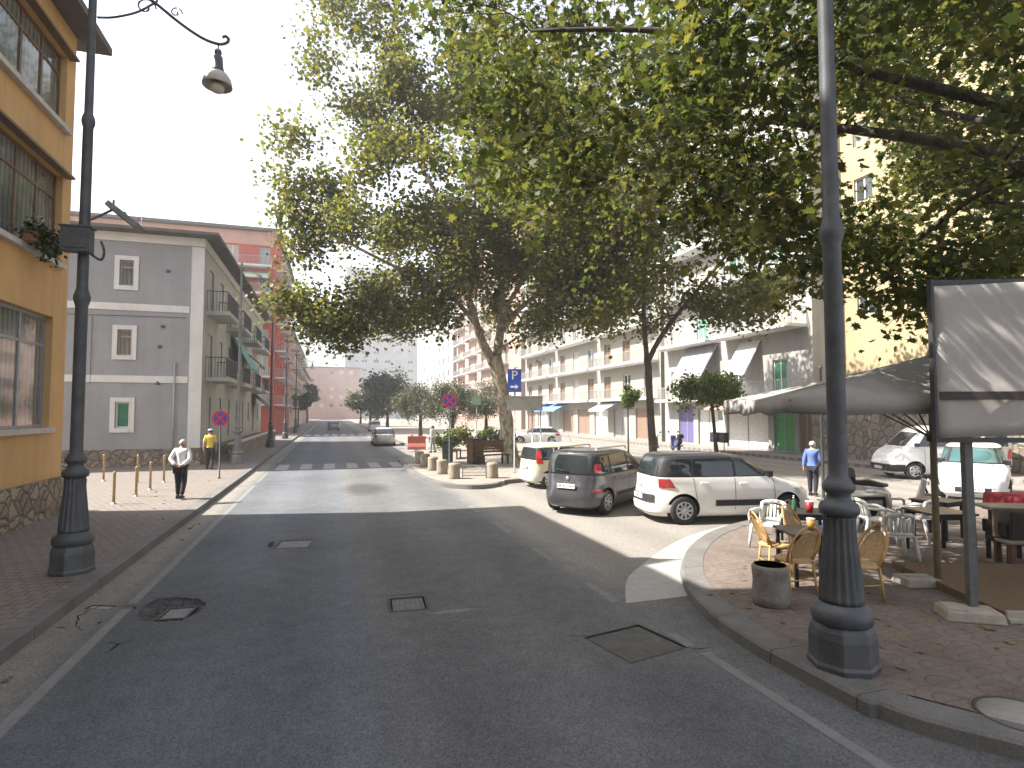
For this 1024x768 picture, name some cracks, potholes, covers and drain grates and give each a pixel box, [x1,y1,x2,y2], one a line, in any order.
manhole cover [584,624,689,664]
manhole cover [387,595,430,613]
manhole cover [971,695,1024,732]
pothole [137,597,207,621]
manhole cover [271,539,316,549]
manhole cover [154,606,198,621]
